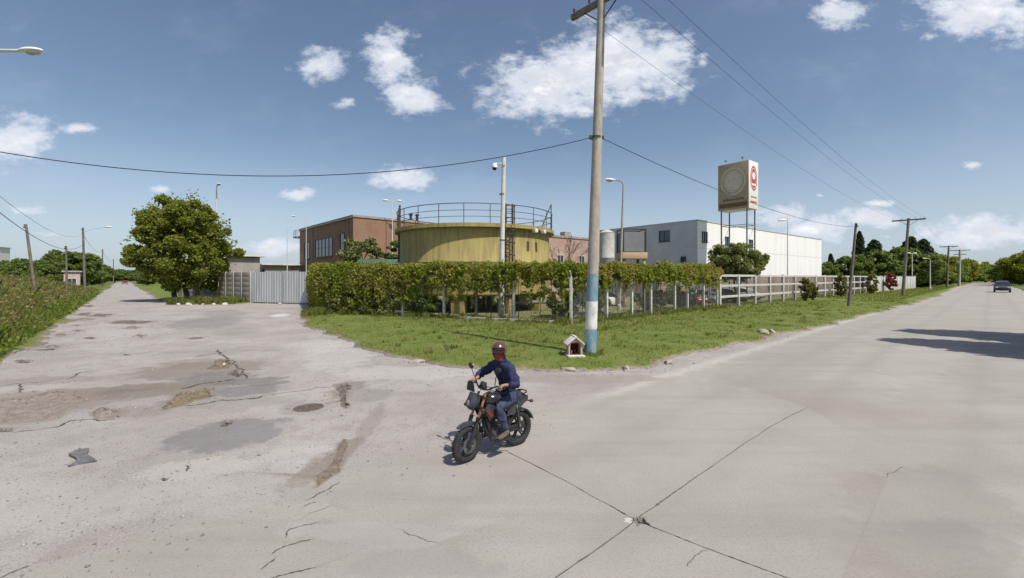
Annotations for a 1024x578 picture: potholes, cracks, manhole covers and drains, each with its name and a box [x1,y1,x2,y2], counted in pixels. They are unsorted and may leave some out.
pothole [163,388,216,410]
pothole [315,439,348,487]
pothole [93,407,121,419]
manhole cover [293,403,324,412]
crack [13,419,115,433]
crack [181,350,321,406]
pothole [208,359,232,369]
pothole [333,384,351,408]
crack [263,483,338,578]
